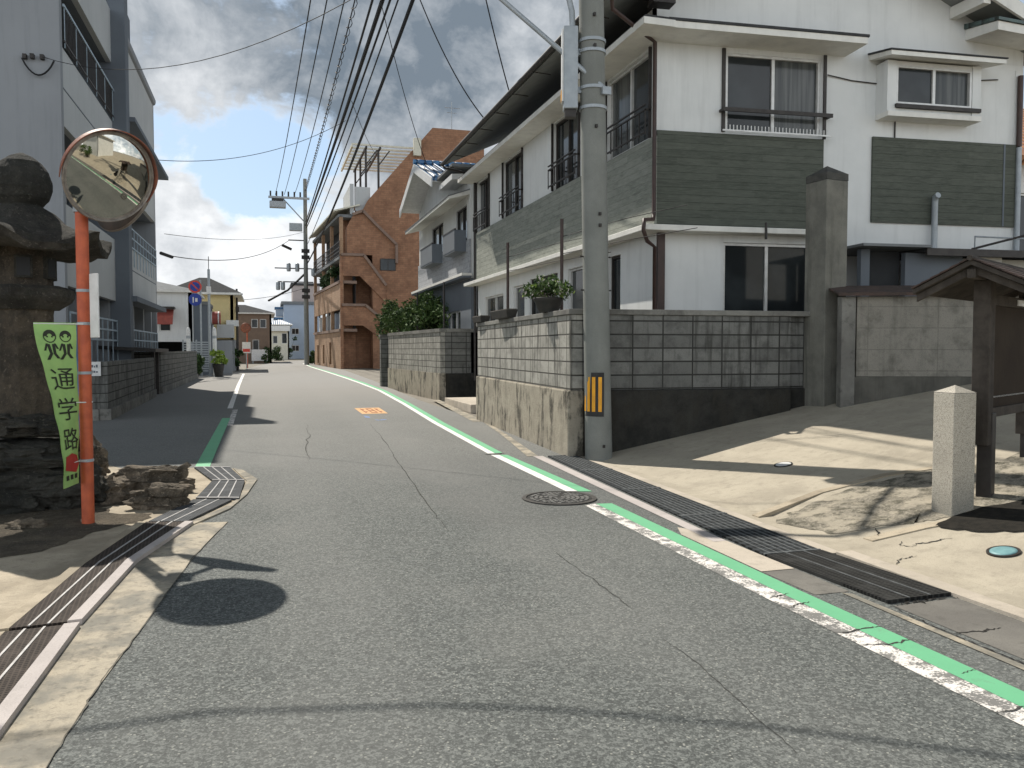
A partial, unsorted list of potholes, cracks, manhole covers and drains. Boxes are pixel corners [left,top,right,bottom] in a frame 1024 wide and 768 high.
crack [661,637,798,754]
crack [556,552,634,610]
manhole cover [522,491,597,506]
crack [371,425,447,529]
utility cover [986,545,1021,558]
